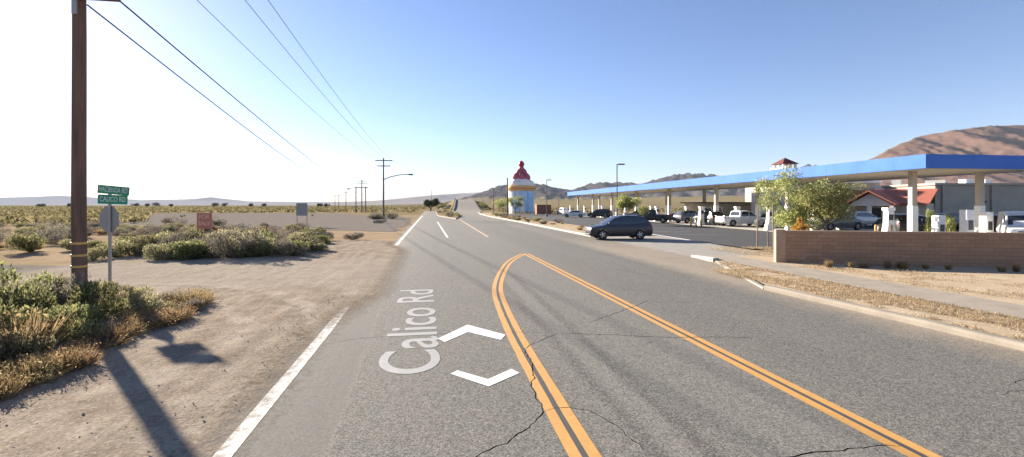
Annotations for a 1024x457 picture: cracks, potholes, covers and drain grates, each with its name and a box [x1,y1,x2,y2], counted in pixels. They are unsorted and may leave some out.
crack [791,445,887,457]
